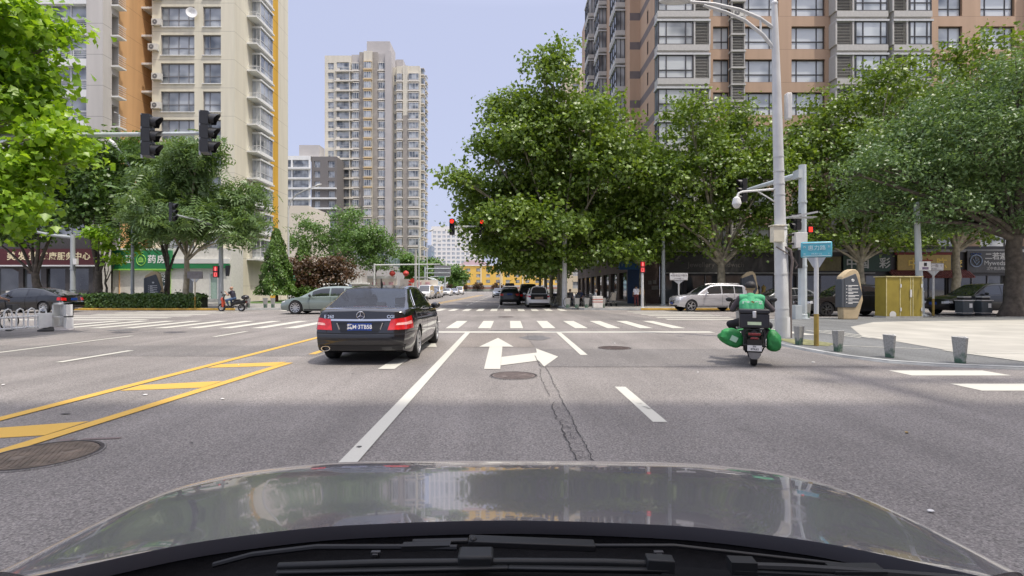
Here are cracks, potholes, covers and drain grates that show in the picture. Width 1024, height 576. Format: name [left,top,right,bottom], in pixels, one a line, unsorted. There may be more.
manhole cover [0,440,107,473]
crack [536,358,594,461]
manhole cover [489,371,538,380]
